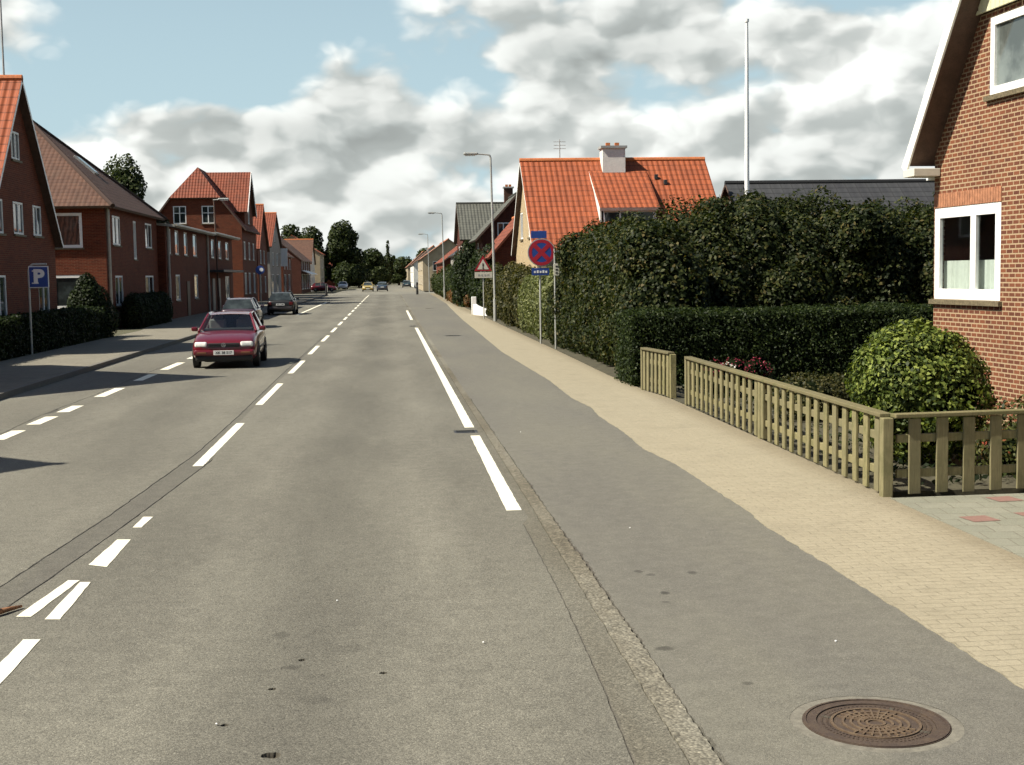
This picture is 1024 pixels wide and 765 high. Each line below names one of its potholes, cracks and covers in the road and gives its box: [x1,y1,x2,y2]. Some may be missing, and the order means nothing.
manhole cover [790,696,965,753]
